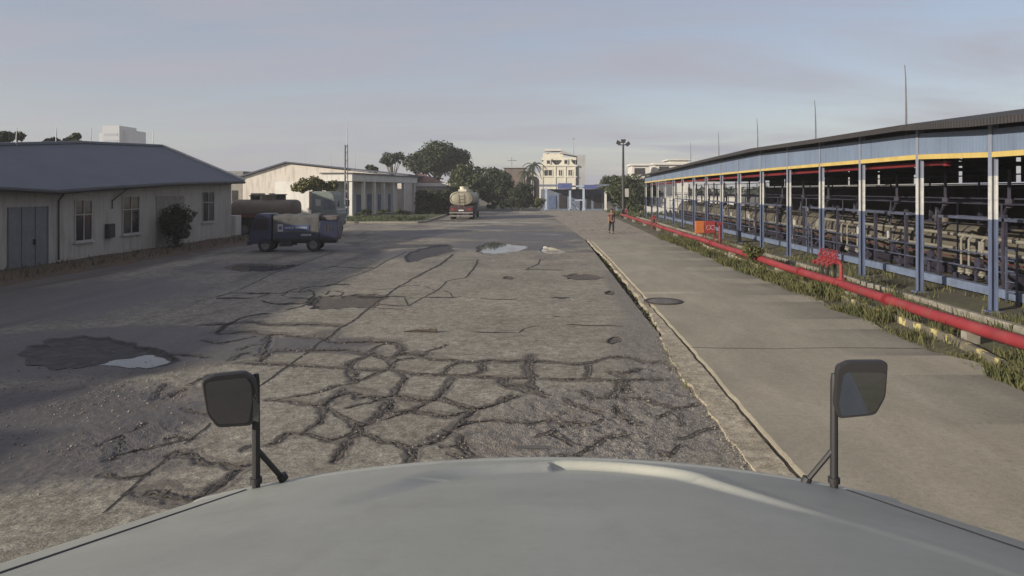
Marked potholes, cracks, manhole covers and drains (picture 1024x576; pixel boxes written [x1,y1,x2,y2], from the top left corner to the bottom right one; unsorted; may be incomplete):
crack [96,374,251,501]
pothole [476,241,529,254]
pothole [17,335,180,371]
crack [175,252,714,462]
